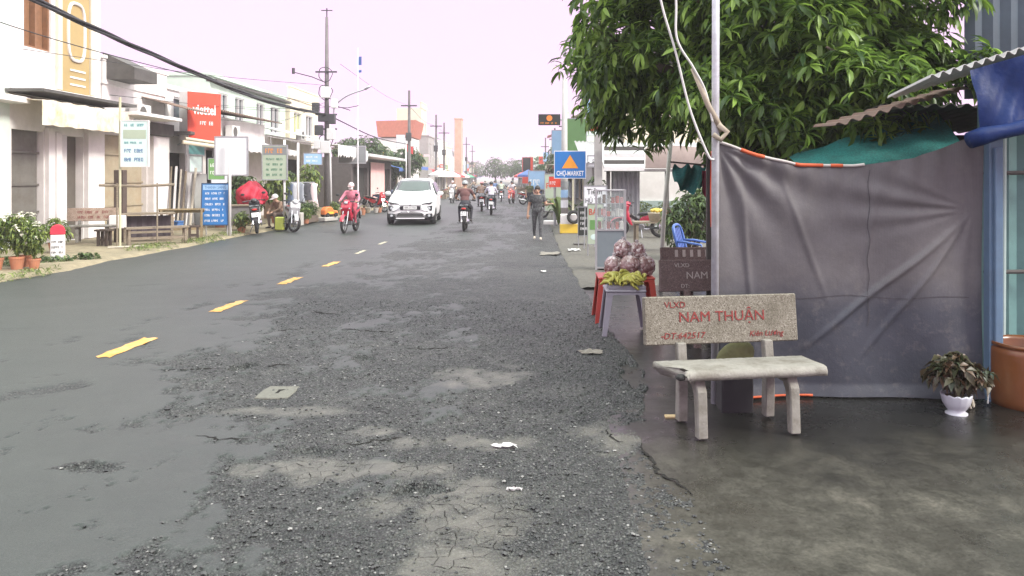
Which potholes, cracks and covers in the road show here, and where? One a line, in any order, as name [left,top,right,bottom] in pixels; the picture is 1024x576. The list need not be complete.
pothole [49,459,125,474]
crack [370,486,531,569]
crack [640,443,693,496]
